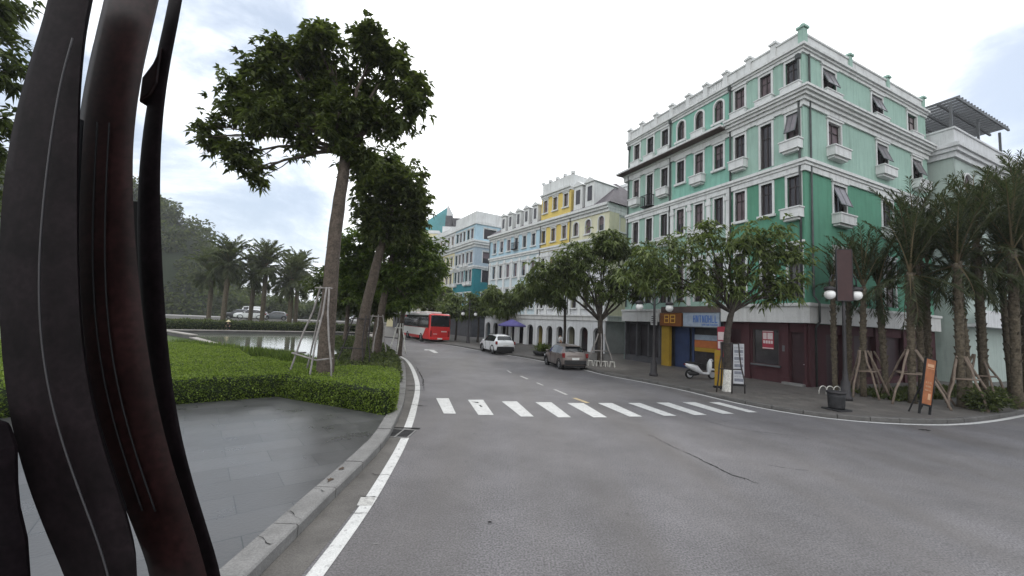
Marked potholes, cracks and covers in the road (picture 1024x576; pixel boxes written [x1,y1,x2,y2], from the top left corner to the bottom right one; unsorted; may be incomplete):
crack [647,434,760,484]
drain grate [389,427,420,438]
